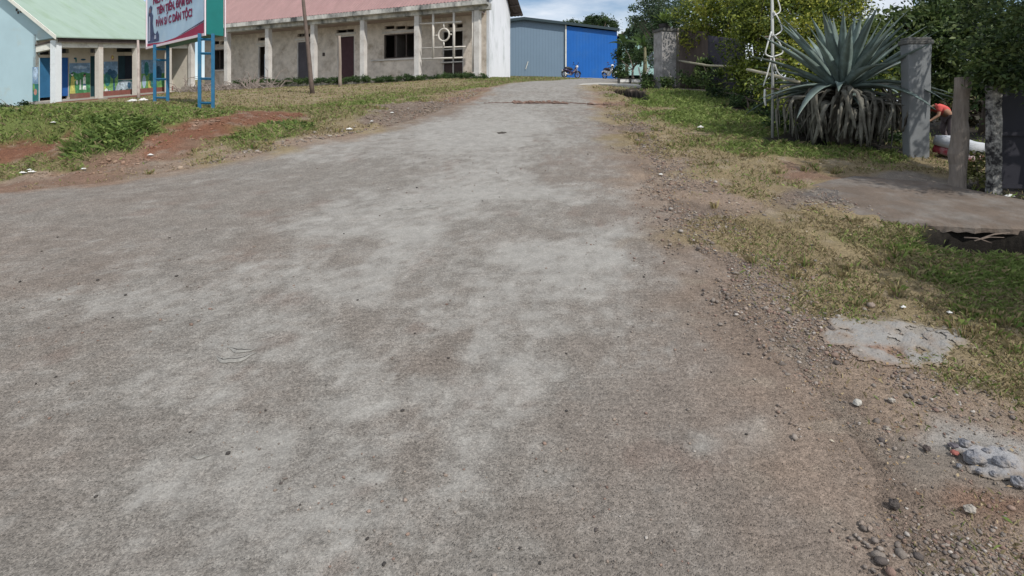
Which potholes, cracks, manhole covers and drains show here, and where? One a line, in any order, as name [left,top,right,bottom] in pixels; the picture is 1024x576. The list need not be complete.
crack [216,347,259,363]
